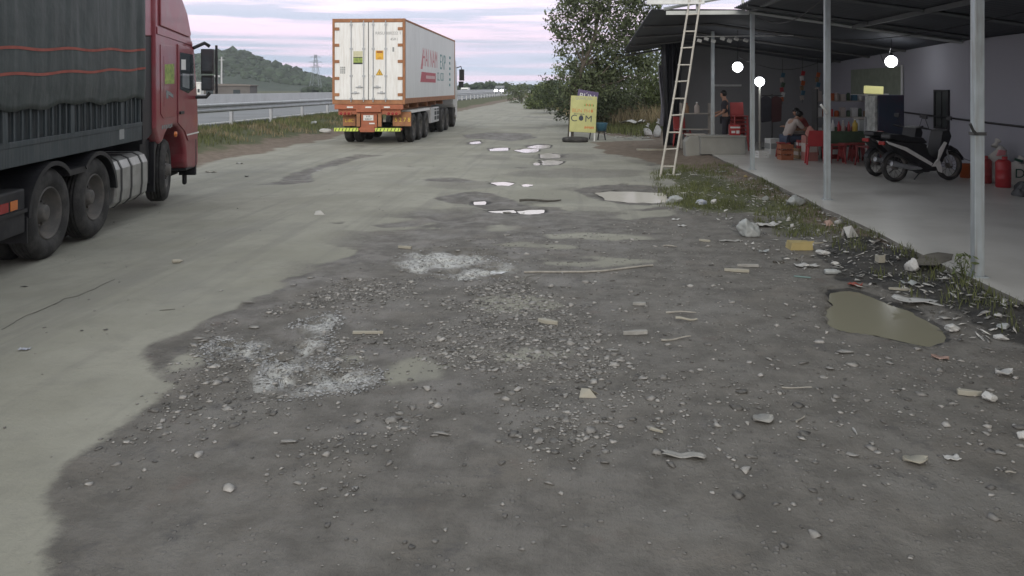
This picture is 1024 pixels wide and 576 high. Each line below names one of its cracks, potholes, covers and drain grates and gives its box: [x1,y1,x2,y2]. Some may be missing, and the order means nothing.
pothole [822,285,955,349]
pothole [534,159,570,167]
pothole [566,182,672,206]
pothole [427,191,579,218]
crack [3,280,112,329]
